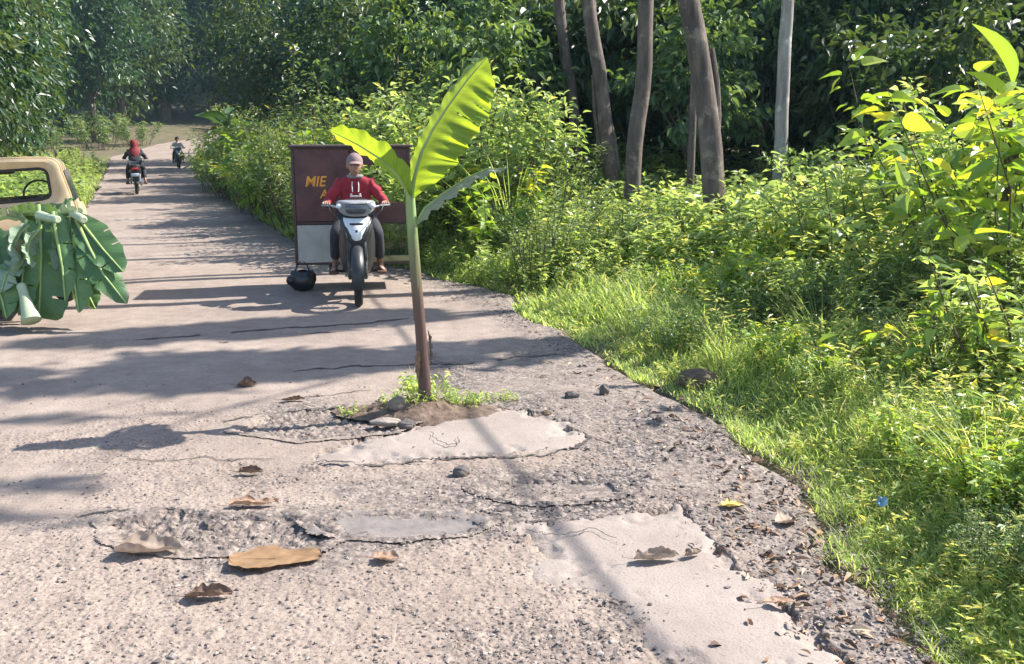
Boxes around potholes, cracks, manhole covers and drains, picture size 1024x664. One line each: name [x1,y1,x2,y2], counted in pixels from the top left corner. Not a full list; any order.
crack [133,318,406,342]
pothole [89,503,351,559]
crack [297,354,561,371]
pothole [224,402,422,443]
